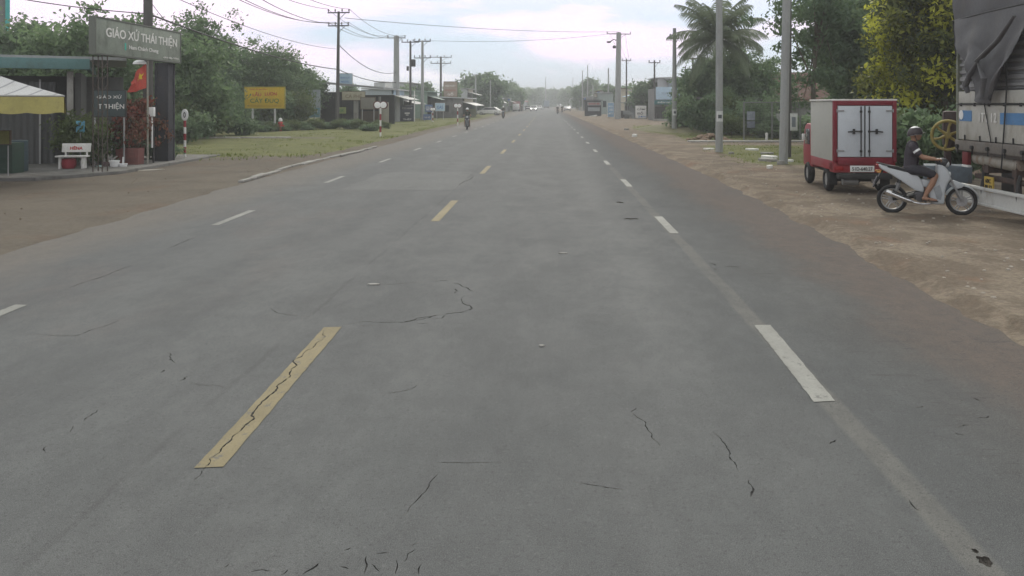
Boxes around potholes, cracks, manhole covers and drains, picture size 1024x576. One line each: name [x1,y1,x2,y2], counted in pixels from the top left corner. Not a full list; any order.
crack [353,280,473,324]
crack [227,475,437,574]
pothole [976,556,993,567]
crack [719,437,755,496]
